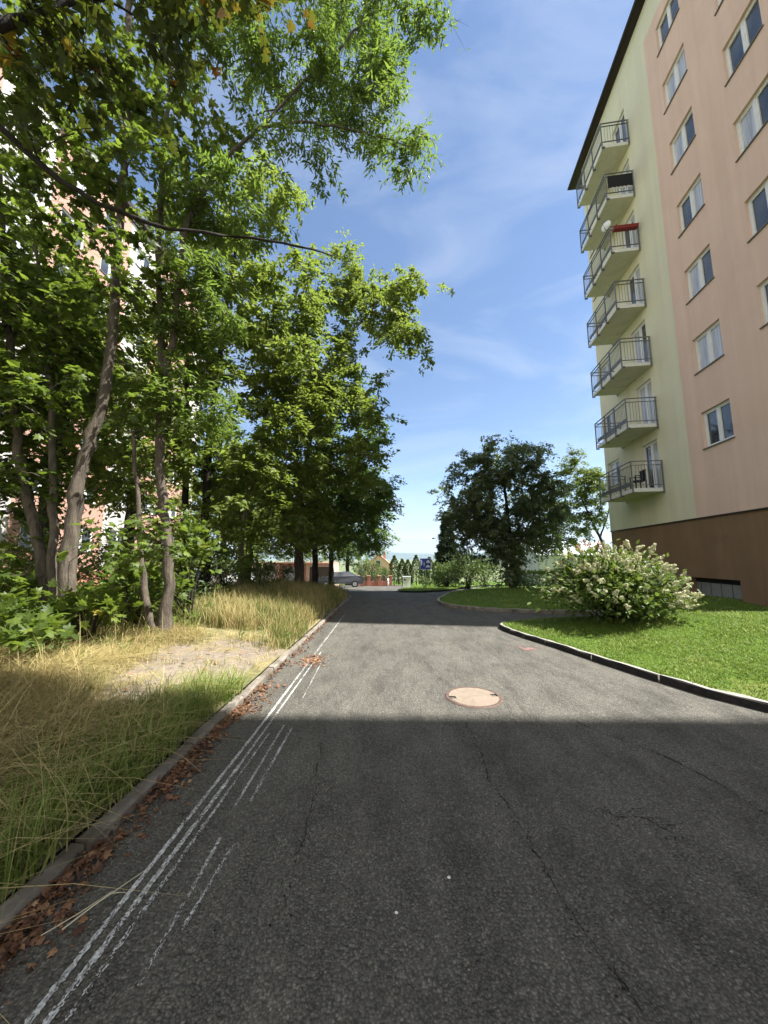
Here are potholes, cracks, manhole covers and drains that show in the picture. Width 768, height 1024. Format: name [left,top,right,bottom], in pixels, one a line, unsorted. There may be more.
crack [269,728,329,954]
manhole cover [445,686,503,709]
crack [460,729,692,1024]
crack [575,720,767,820]
